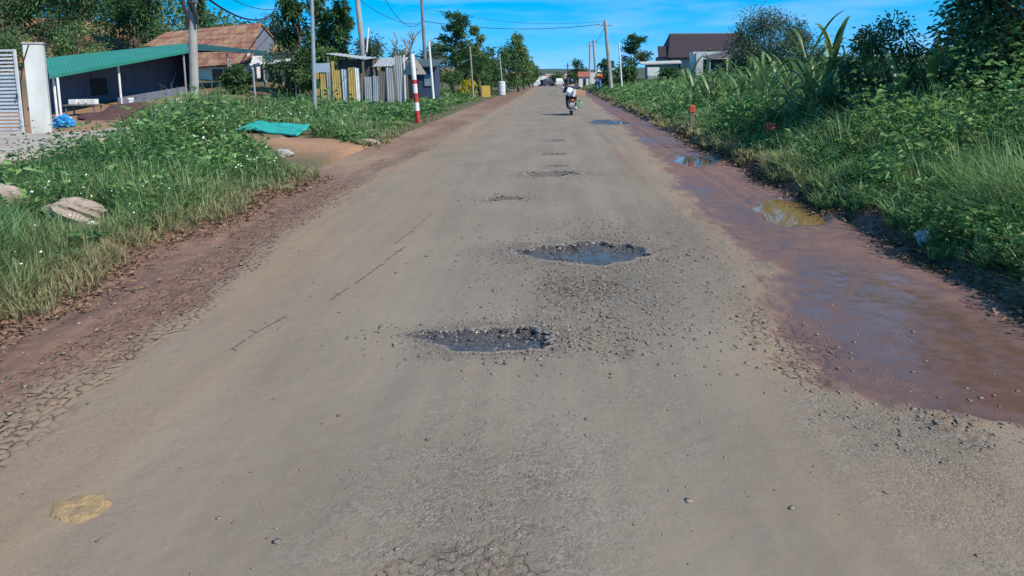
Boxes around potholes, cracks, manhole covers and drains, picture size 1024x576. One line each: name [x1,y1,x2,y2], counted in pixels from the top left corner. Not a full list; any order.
crack [375,540,552,576]
pothole [396,324,559,353]
pothole [520,170,586,178]
crack [742,310,850,388]
crack [231,315,287,350]
crack [330,212,433,300]
pothole [508,240,658,268]
